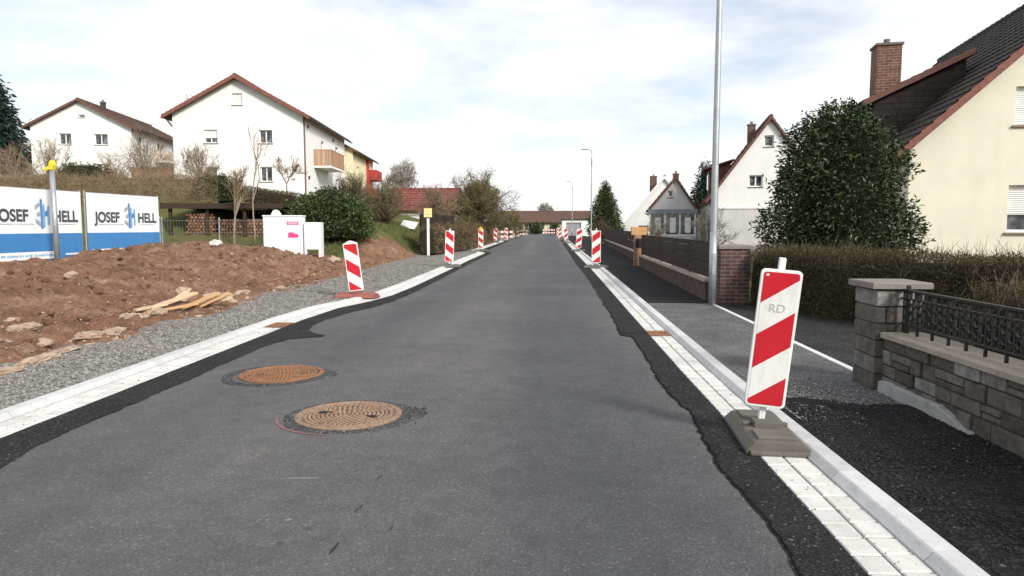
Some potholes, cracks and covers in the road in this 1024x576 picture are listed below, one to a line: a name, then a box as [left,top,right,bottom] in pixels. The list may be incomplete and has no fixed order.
manhole cover [238,365,324,383]
manhole cover [294,401,402,430]
